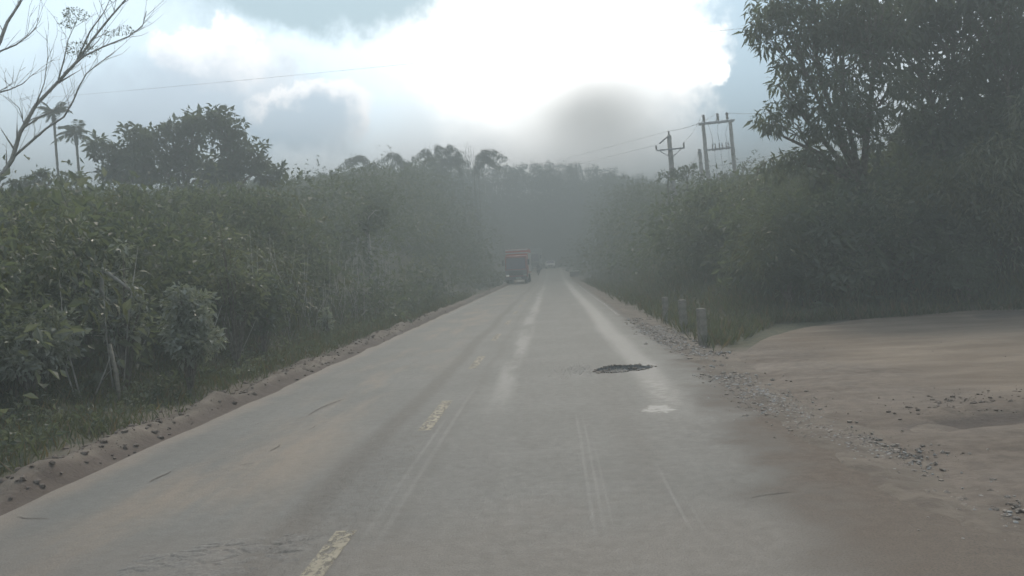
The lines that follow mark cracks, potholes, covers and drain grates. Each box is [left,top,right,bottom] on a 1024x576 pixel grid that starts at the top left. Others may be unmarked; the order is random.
pothole [552,363,657,377]
crack [116,534,324,576]
